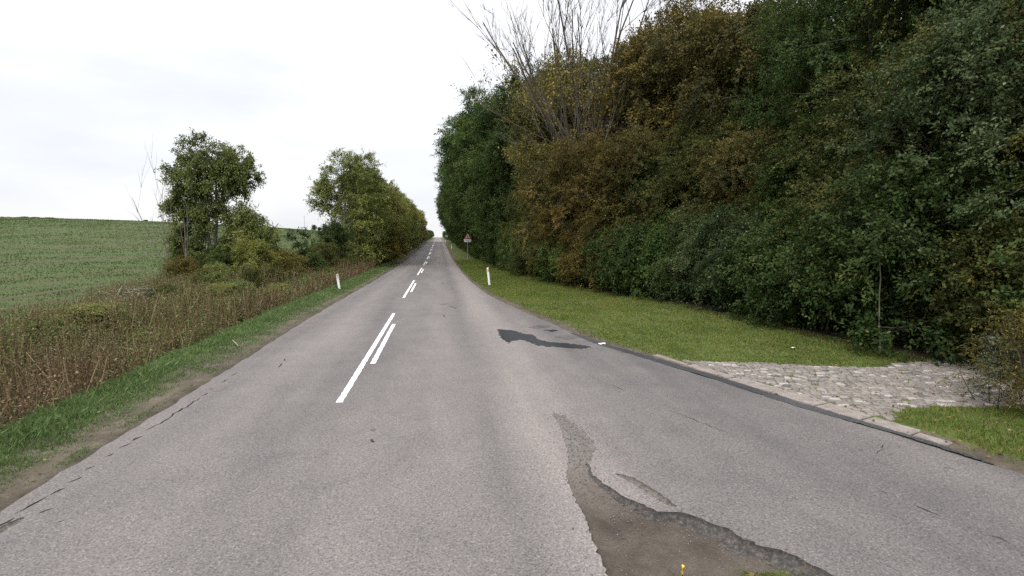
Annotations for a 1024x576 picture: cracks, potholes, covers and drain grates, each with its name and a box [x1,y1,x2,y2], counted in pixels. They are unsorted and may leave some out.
crack [0,495,63,526]
pothole [554,413,833,576]
crack [85,373,236,470]
